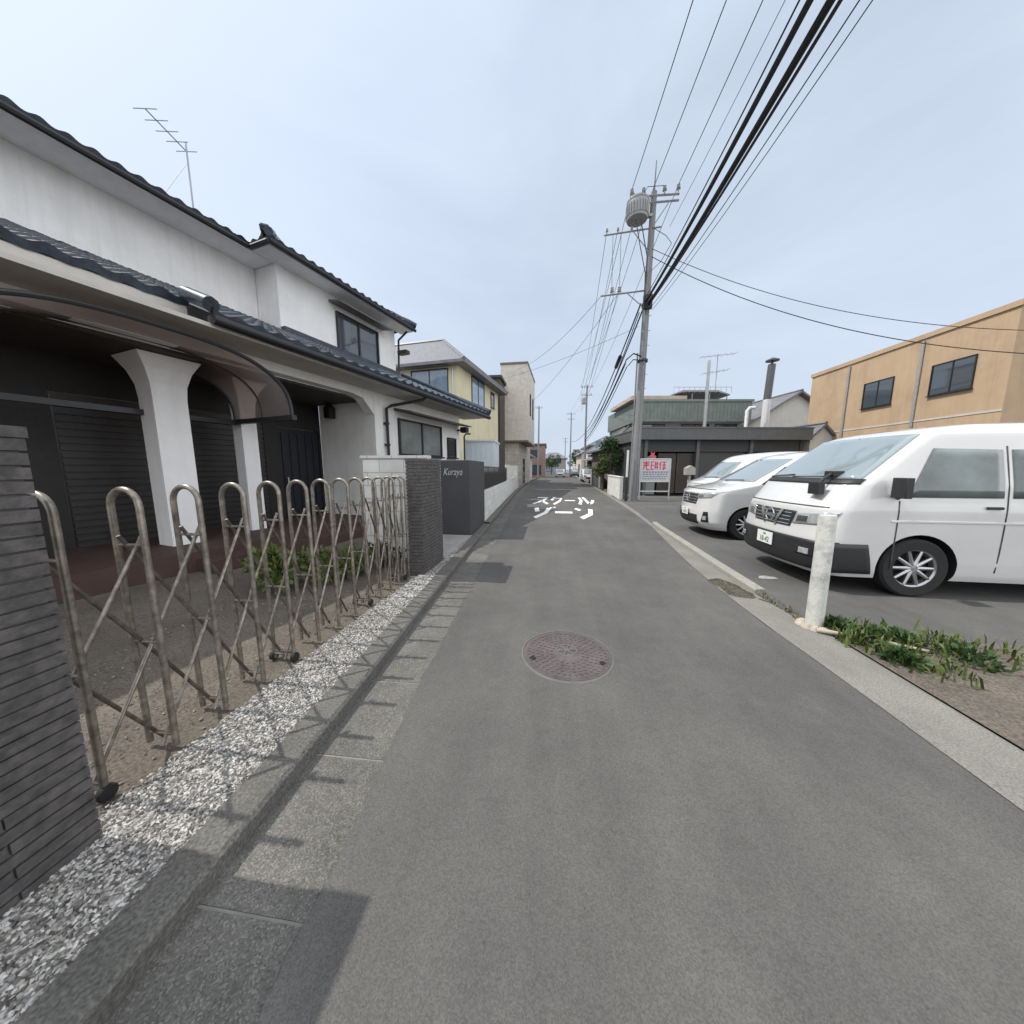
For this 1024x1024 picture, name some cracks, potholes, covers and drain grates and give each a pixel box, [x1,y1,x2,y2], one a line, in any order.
manhole cover [521,631,615,684]
